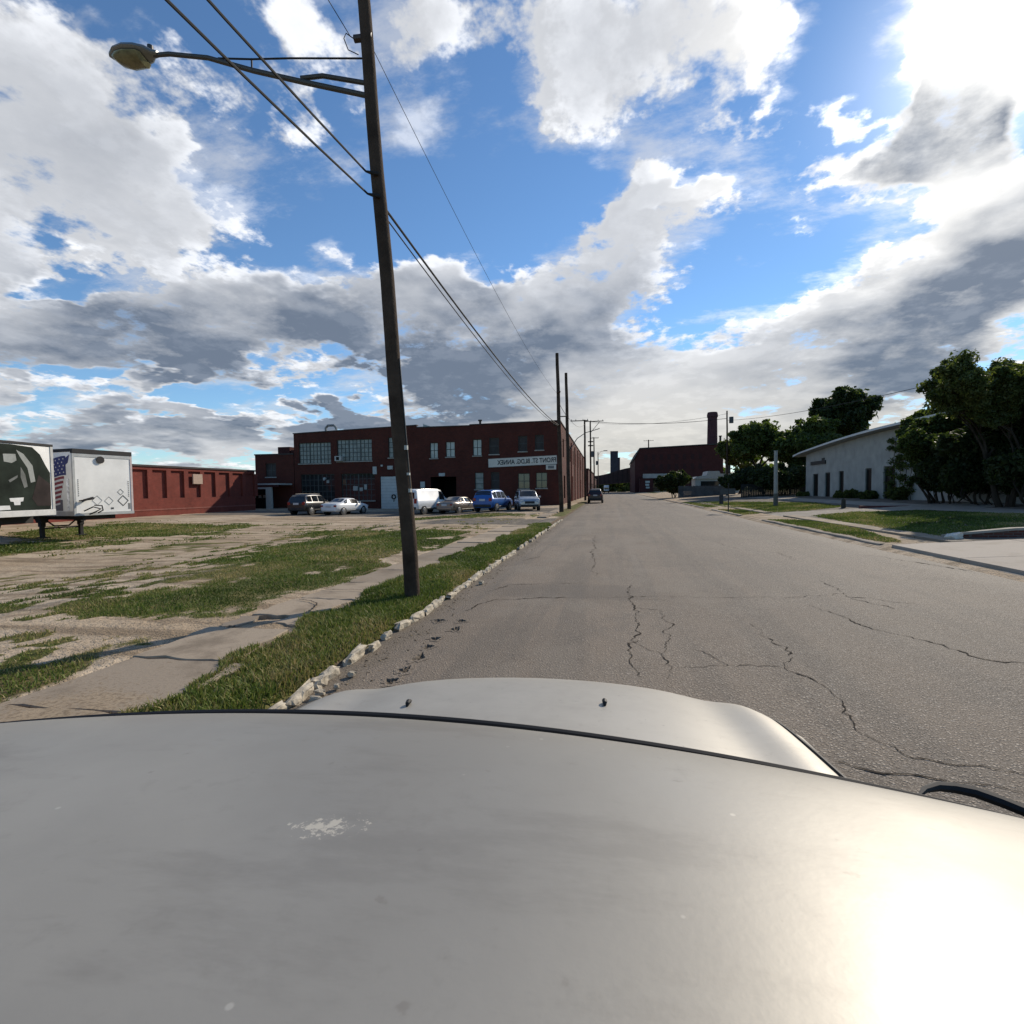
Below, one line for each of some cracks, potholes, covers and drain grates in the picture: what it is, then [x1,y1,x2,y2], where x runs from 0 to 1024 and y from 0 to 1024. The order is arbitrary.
pothole [406,650,429,664]
pothole [381,676,404,687]
crack [680,624,1024,792]
crack [465,535,1024,677]
pothole [393,663,415,676]
